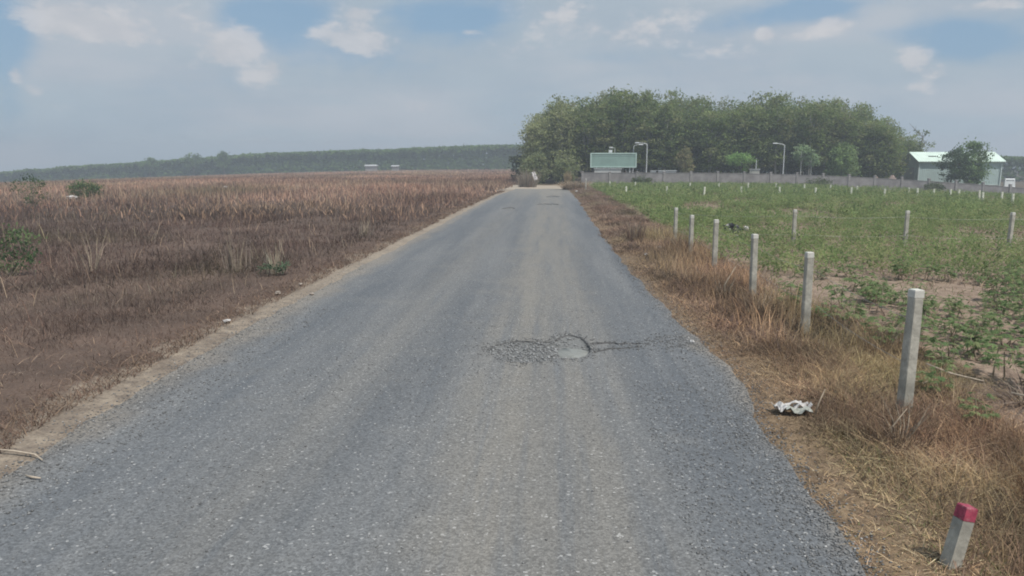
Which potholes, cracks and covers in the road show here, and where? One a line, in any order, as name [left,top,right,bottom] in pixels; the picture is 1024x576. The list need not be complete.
crack [592,342,649,353]
pothole [486,335,591,363]
